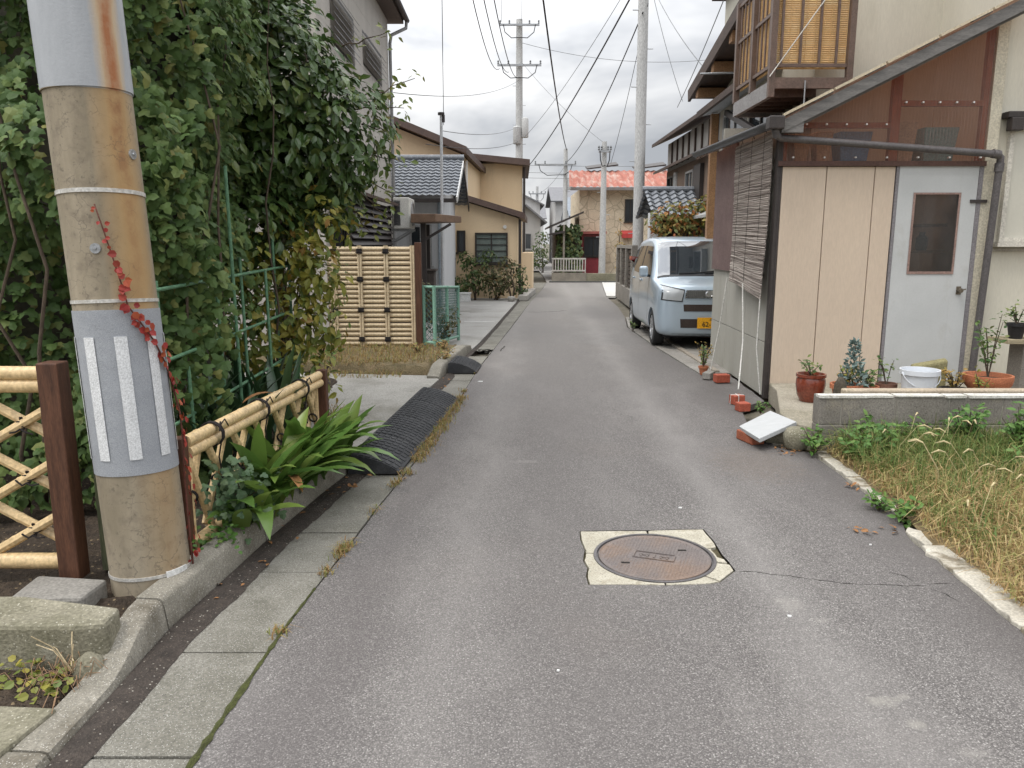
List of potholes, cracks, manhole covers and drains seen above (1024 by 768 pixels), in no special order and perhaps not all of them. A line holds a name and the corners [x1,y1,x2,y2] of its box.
crack [740,571,959,602]
manhole cover [580,529,734,586]
